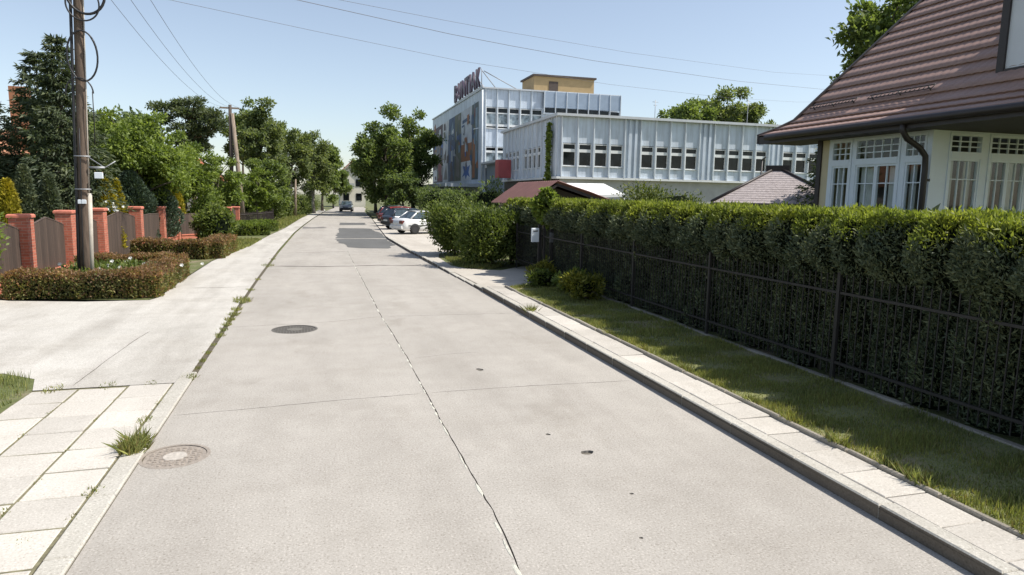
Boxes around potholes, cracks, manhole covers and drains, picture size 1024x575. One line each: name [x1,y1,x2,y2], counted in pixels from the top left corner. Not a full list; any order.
manhole cover [271,325,318,334]
manhole cover [138,444,211,469]
